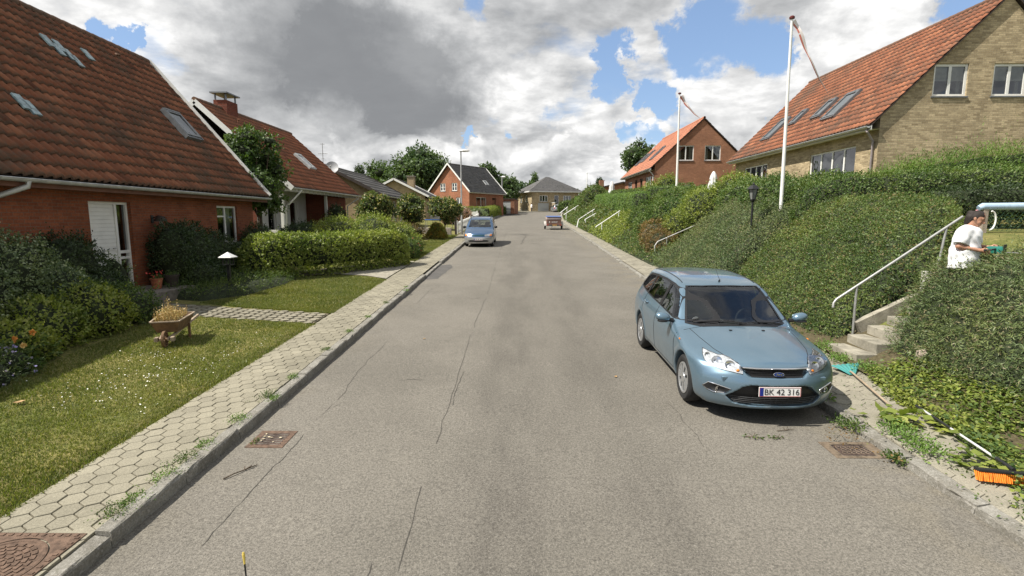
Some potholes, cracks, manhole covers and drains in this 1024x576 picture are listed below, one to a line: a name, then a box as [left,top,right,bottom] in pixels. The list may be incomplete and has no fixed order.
drain grate [818,442,892,459]
manhole cover [0,532,87,576]
crack [397,237,505,574]
crack [208,290,430,539]
drain grate [244,431,298,448]
